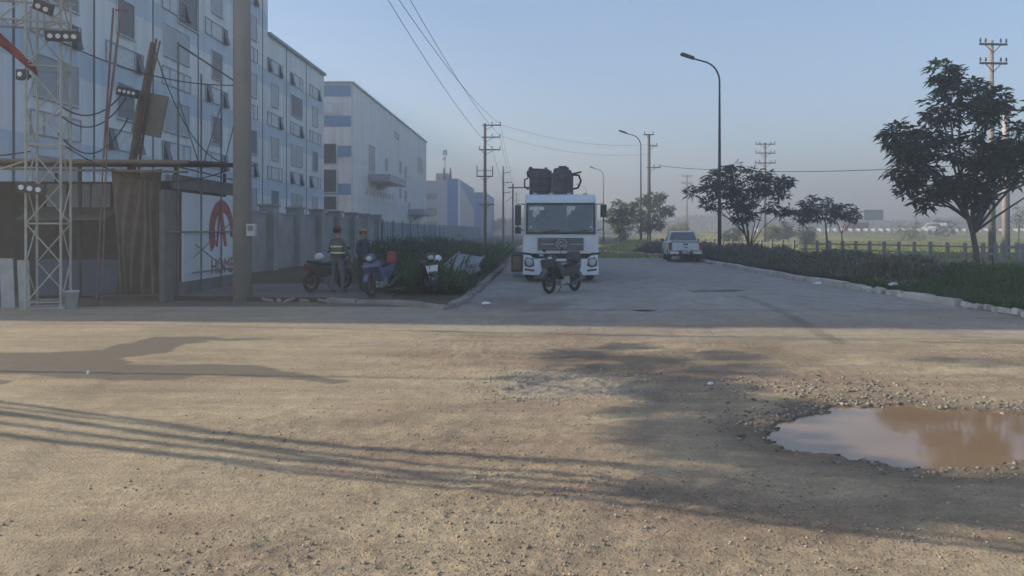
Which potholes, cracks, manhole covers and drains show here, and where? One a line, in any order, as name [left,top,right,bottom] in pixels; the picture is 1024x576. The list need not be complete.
pothole [742,399,1024,475]
